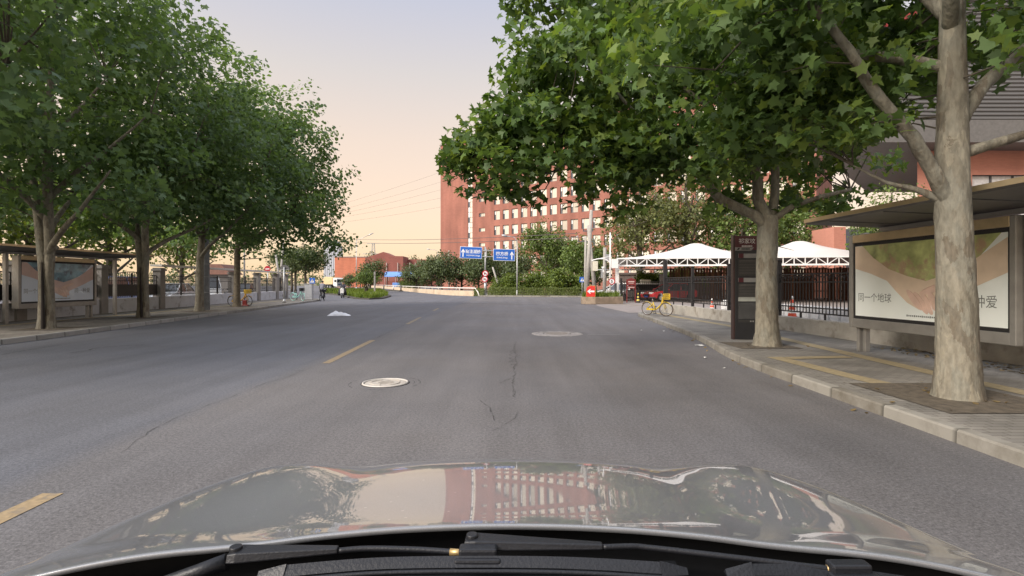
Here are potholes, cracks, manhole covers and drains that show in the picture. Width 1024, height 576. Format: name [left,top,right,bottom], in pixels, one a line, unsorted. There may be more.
manhole cover [360,378,410,388]
